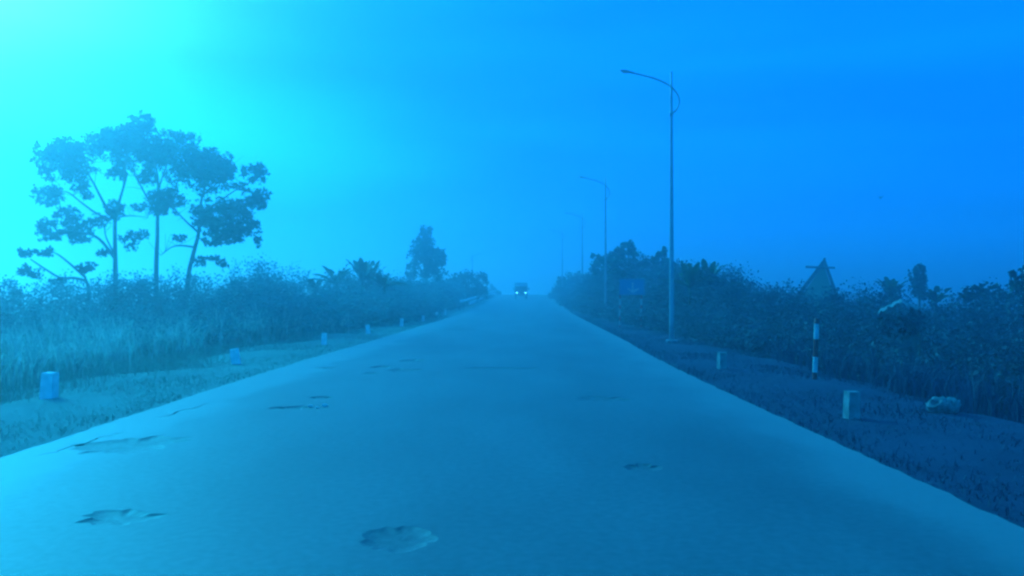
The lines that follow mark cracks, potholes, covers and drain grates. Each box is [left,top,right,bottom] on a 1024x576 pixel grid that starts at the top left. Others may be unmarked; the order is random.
pothole [69,436,192,454]
pothole [624,463,663,471]
pothole [359,526,440,553]
pothole [75,508,169,525]
